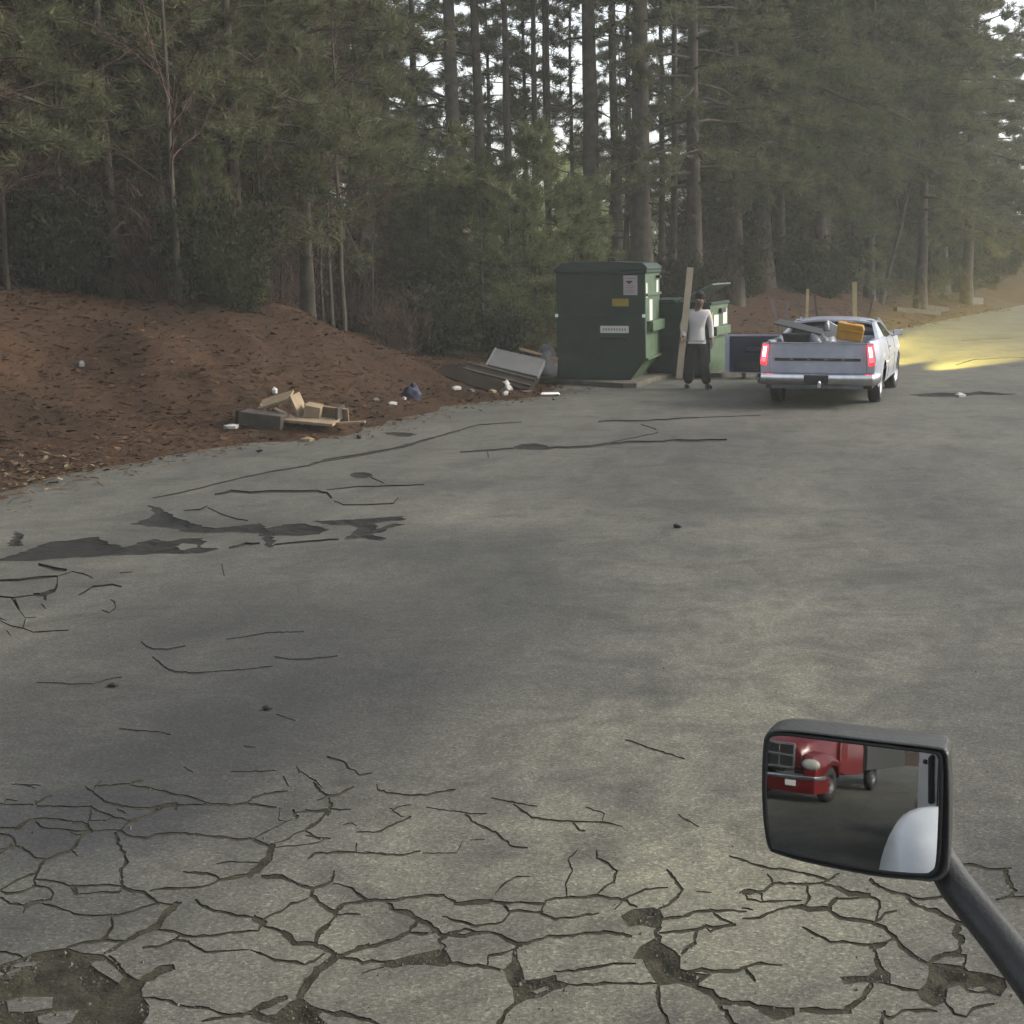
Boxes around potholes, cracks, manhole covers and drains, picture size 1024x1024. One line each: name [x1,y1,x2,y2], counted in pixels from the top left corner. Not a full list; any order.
pothole [502,950,570,1018]
pothole [633,939,712,990]
crack [0,563,130,636]
crack [625,739,685,759]
pothole [0,948,150,1024]
crack [141,631,338,674]
crack [0,756,1024,1024]
pothole [621,907,664,928]
